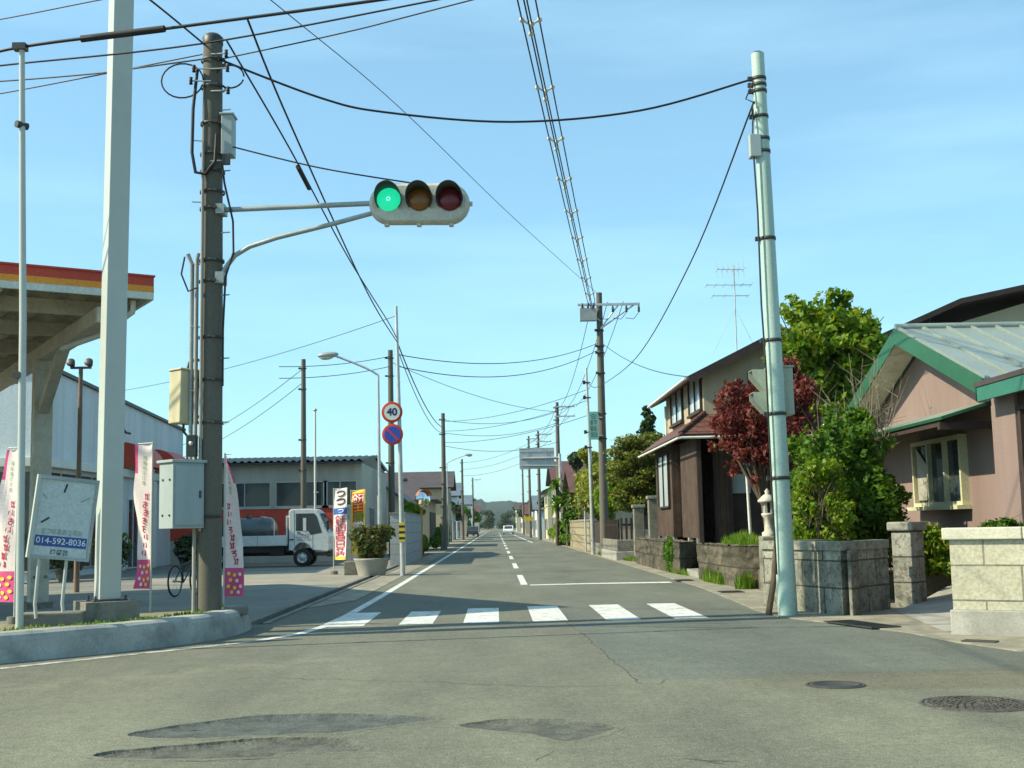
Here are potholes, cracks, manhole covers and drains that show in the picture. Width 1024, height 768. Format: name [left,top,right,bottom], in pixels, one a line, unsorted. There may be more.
drain grate [823,620,901,629]
manhole cover [805,681,867,689]
manhole cover [919,696,1024,712]
